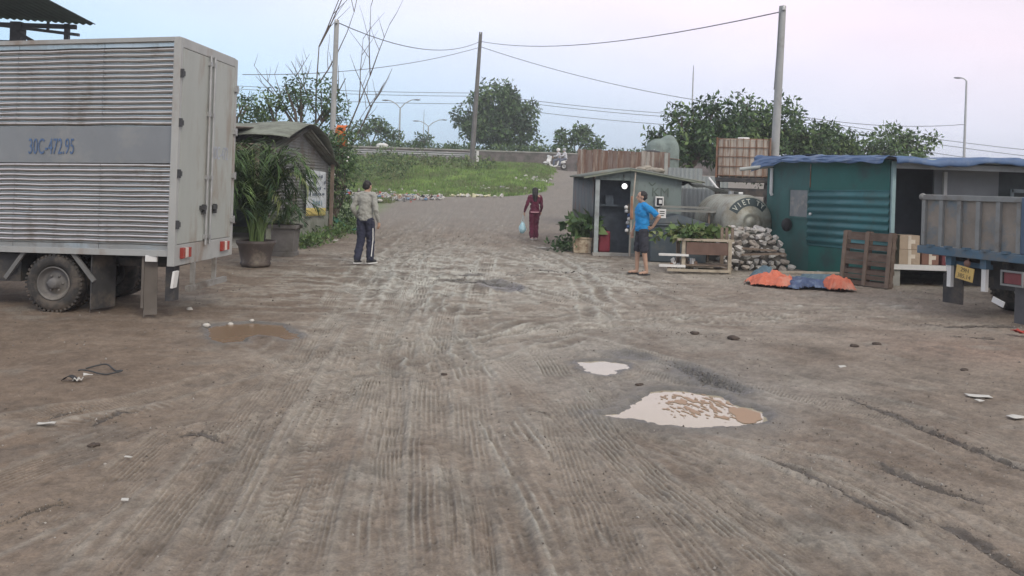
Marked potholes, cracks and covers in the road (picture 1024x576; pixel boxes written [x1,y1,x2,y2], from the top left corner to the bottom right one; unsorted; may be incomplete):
pothole [571,358,641,376]
pothole [201,321,305,344]
pothole [588,386,777,430]
pothole [478,278,529,293]
